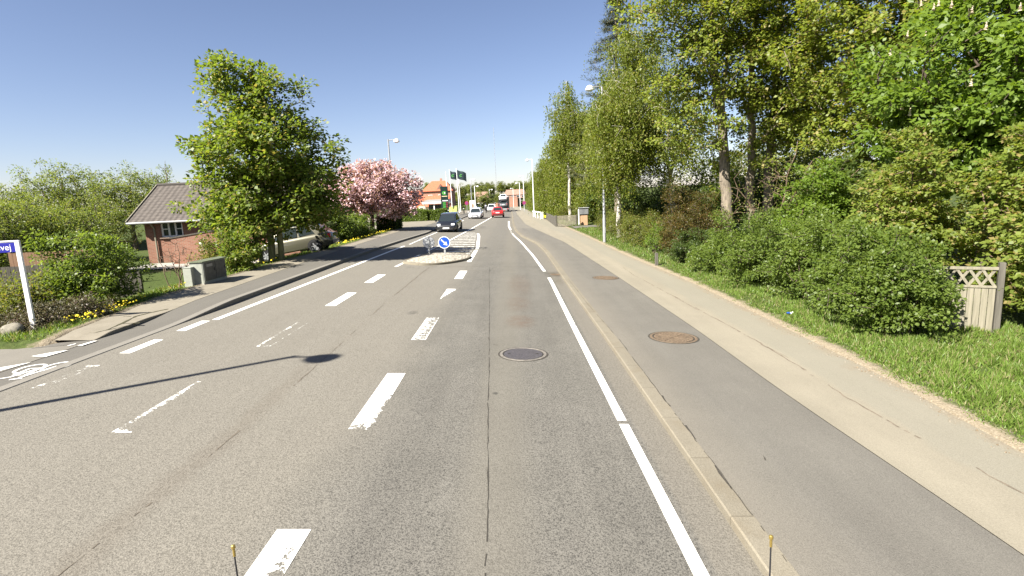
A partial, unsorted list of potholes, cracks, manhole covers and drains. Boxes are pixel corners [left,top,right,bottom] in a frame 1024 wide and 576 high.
manhole cover [498,347,548,361]
manhole cover [648,331,700,344]
